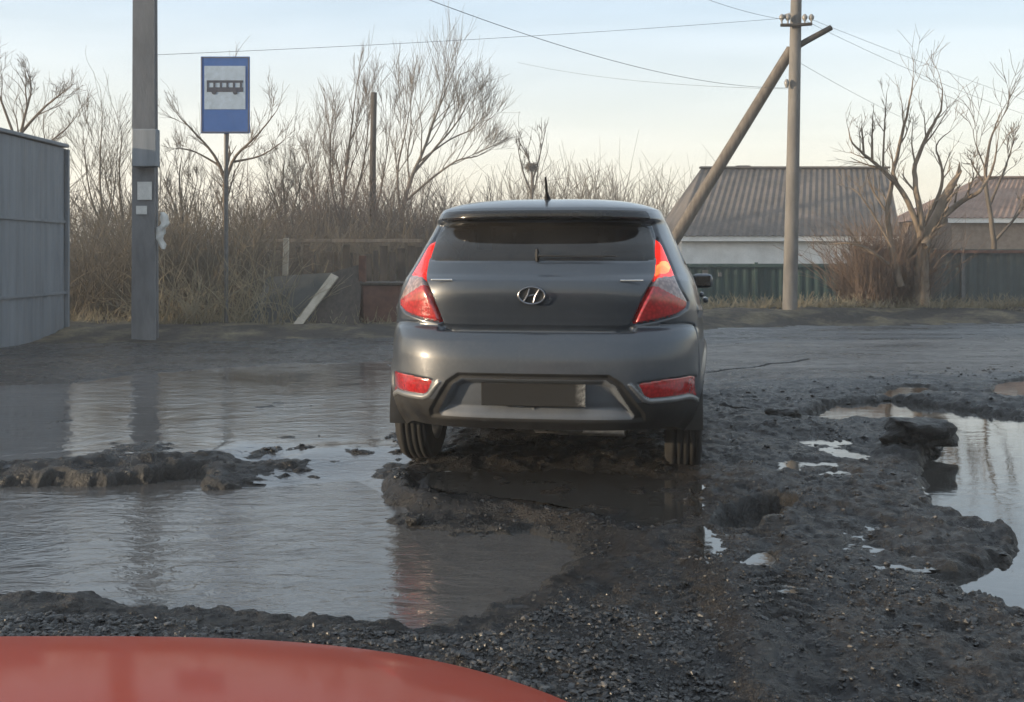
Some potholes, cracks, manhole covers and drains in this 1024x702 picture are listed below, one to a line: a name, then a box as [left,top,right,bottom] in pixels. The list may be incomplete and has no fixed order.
pothole [0,455,594,629]
pothole [708,487,801,529]
pothole [800,393,1024,611]
crack [707,359,809,373]
pothole [875,383,939,401]
